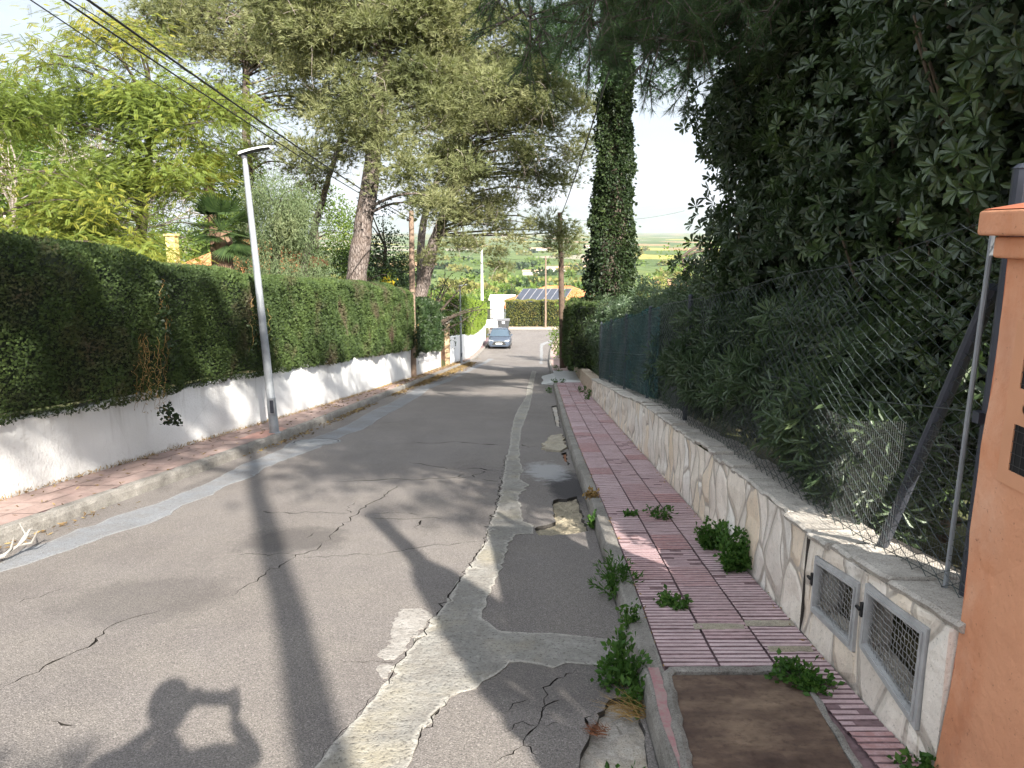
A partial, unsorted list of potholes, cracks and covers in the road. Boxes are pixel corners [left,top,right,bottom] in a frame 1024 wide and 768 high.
crack [492,672,574,764]
crack [0,613,150,690]
pothole [535,496,588,536]
crack [234,463,490,595]
